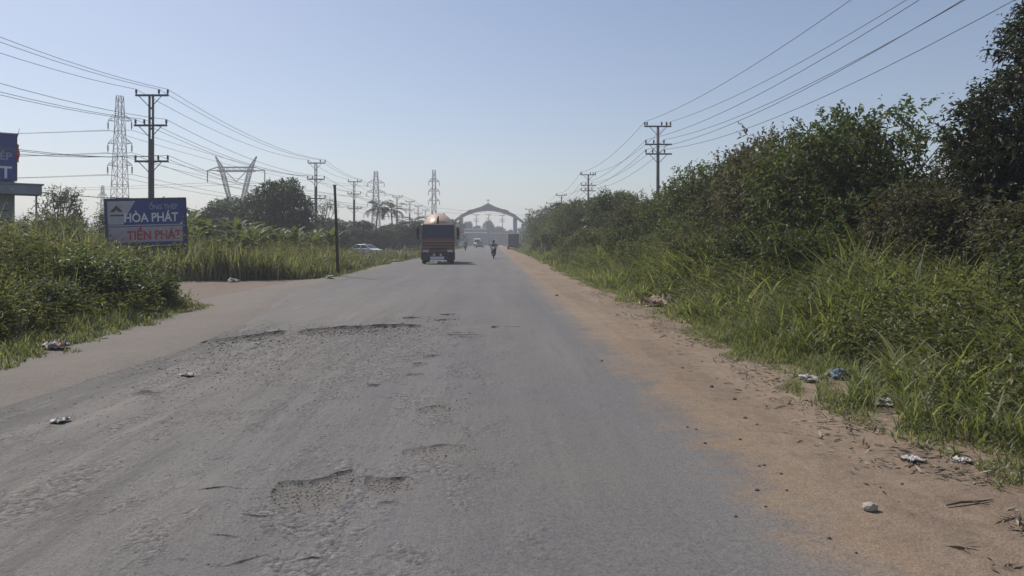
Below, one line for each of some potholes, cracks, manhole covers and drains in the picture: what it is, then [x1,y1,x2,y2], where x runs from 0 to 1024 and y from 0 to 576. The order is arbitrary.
pothole [297,324,423,335]
pothole [270,468,359,515]
pothole [416,404,456,415]
crack [162,485,331,576]
pothole [201,330,288,346]
pothole [363,476,413,495]
pothole [376,500,402,509]
pothole [401,443,478,458]
